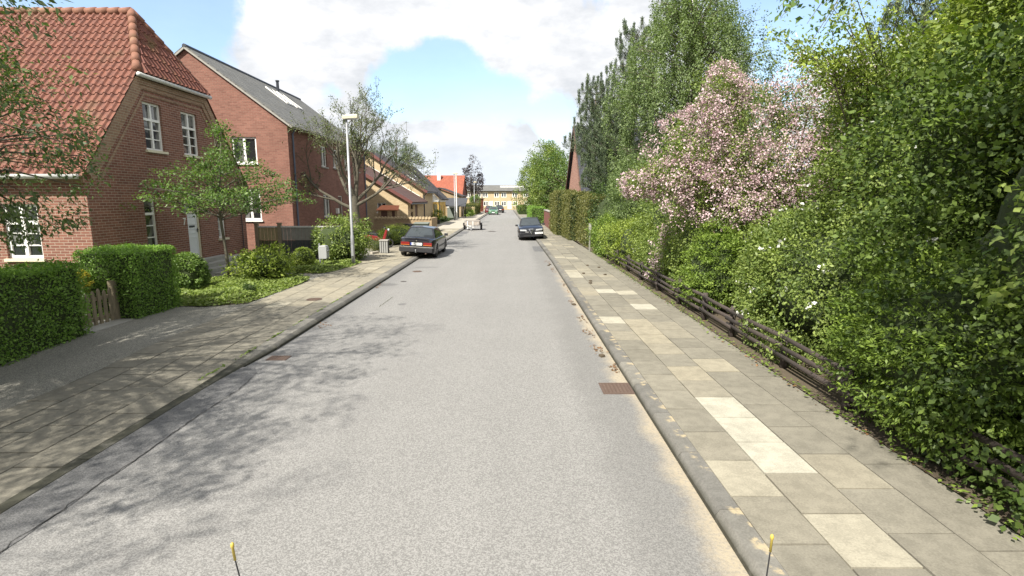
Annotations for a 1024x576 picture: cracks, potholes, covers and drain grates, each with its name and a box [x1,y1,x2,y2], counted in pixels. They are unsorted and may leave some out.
drain grate [598,383,635,394]
